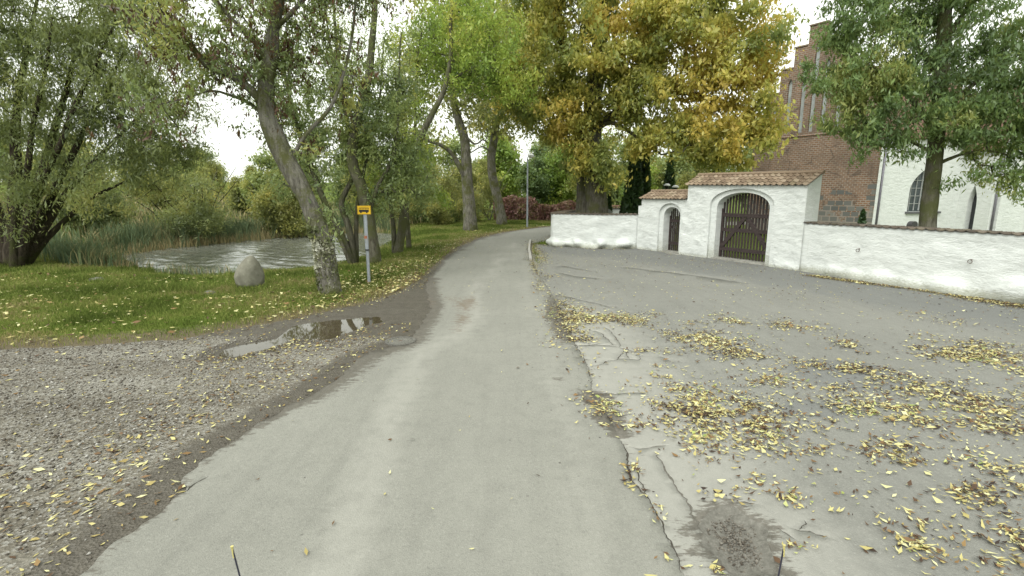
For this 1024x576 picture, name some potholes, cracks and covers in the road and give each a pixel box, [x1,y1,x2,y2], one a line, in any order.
crack [567,323,641,394]
crack [621,441,700,573]
pothole [698,505,776,576]
